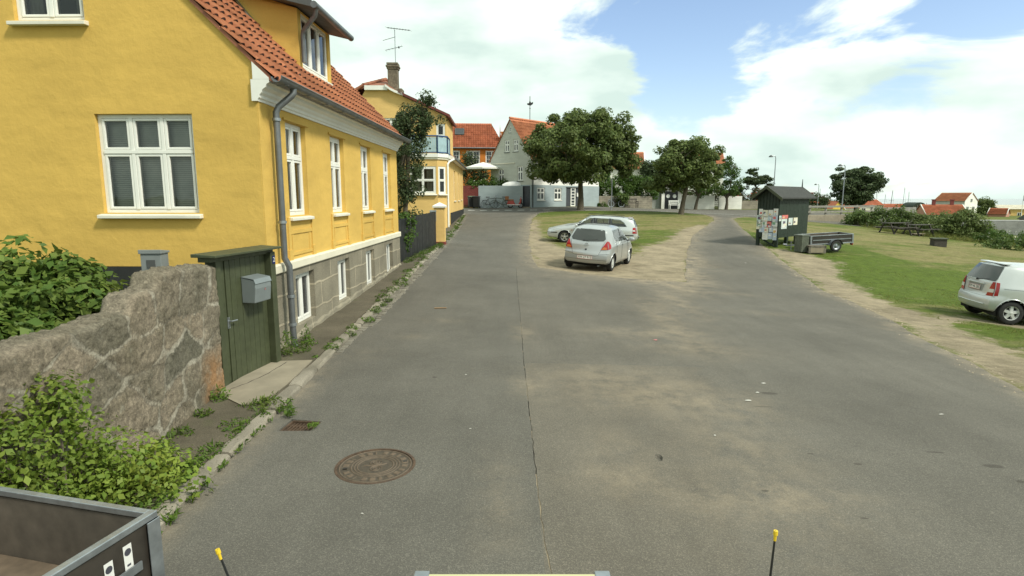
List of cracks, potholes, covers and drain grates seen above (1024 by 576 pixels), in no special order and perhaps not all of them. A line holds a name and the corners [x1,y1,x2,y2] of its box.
crack [516,269,552,573]
manhole cover [334,448,416,484]
drain grate [280,420,321,431]
